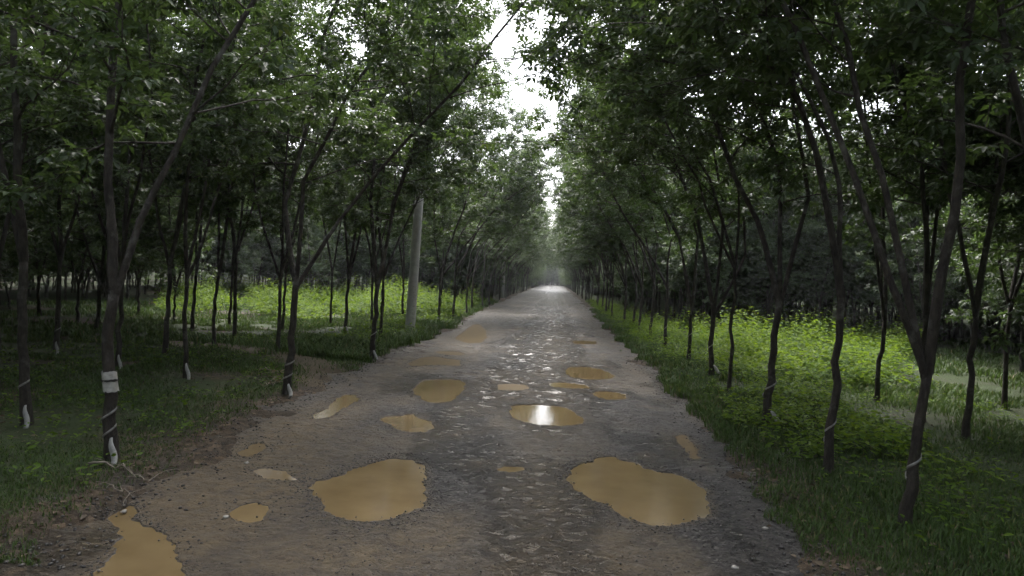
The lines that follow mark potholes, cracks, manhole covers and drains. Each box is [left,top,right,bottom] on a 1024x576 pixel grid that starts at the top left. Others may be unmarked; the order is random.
pothole [252,468,297,481]
pothole [565,366,615,380]
pothole [87,504,187,576]
pothole [229,502,270,523]
pothole [672,434,701,459]
pothole [307,458,429,522]
pothole [412,379,467,403]
pothole [508,404,585,426]
pothole [592,391,627,400]
pothole [455,324,487,343]
pothole [566,456,711,526]
pothole [380,414,435,432]
